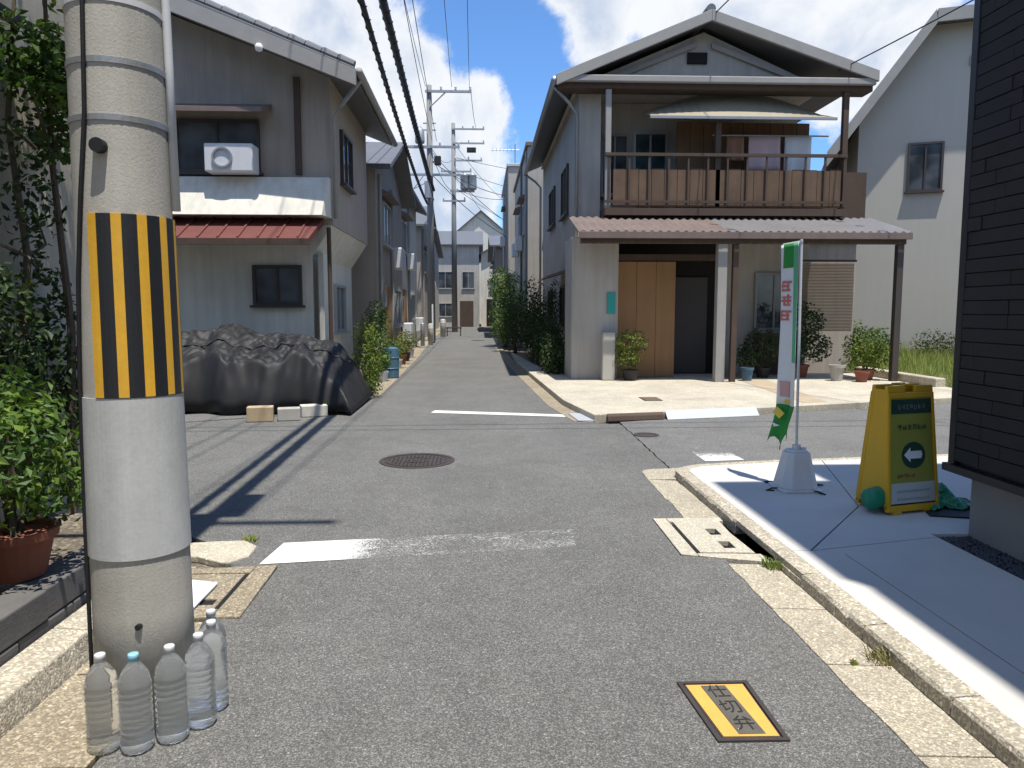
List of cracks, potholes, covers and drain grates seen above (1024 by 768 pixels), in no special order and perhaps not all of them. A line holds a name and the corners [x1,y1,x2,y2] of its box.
utility cover [677,680,791,743]
manhole cover [379,453,455,469]
